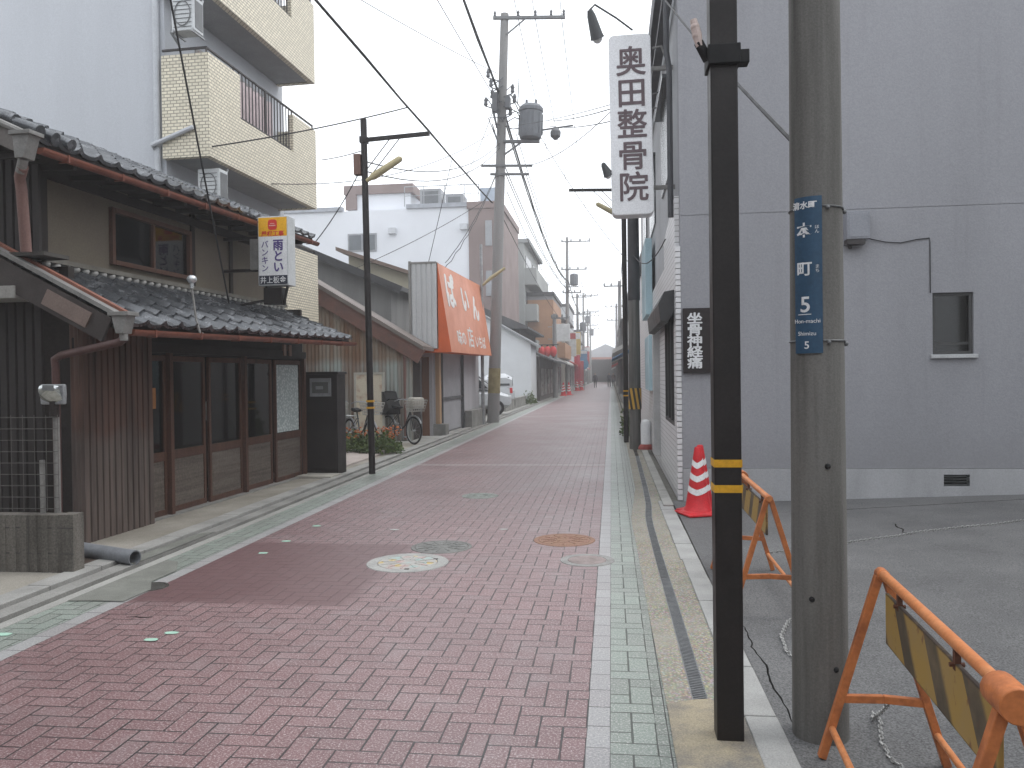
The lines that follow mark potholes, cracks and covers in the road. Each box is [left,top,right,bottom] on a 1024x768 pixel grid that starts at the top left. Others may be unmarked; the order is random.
crack [744,627,792,722]
manhole cover [411,540,472,554]
crack [860,499,1023,535]
manhole cover [366,553,449,573]
drain grate [635,456,708,700]
manhole cover [560,554,615,567]
manhole cover [534,534,595,547]
